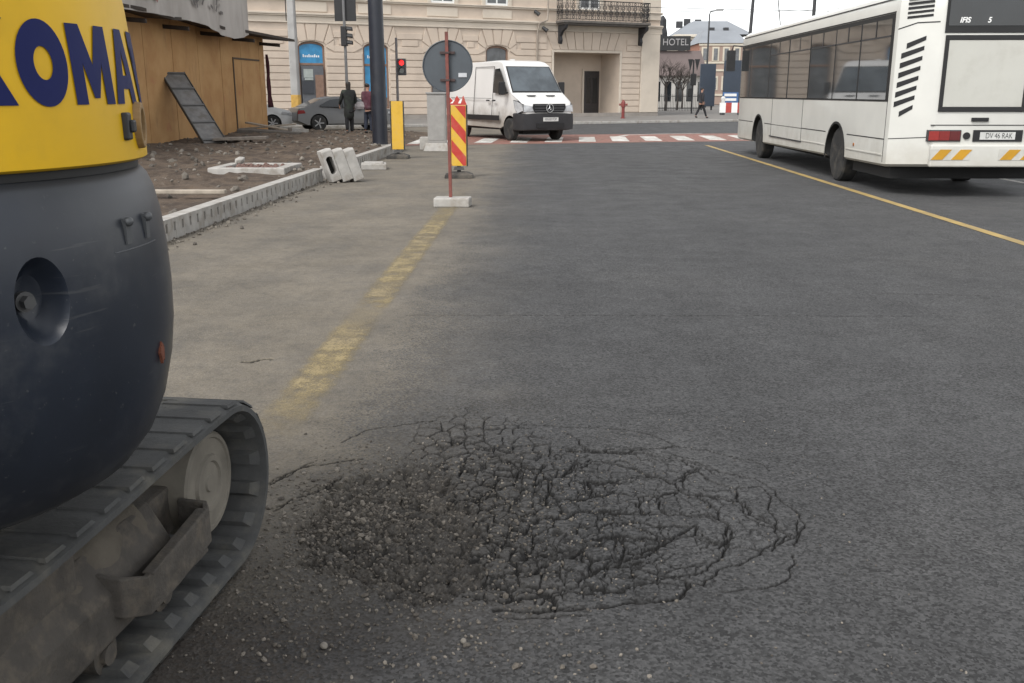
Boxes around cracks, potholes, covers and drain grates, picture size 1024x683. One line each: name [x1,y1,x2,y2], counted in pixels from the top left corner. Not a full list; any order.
pothole [292,463,487,608]
crack [268,407,809,622]
